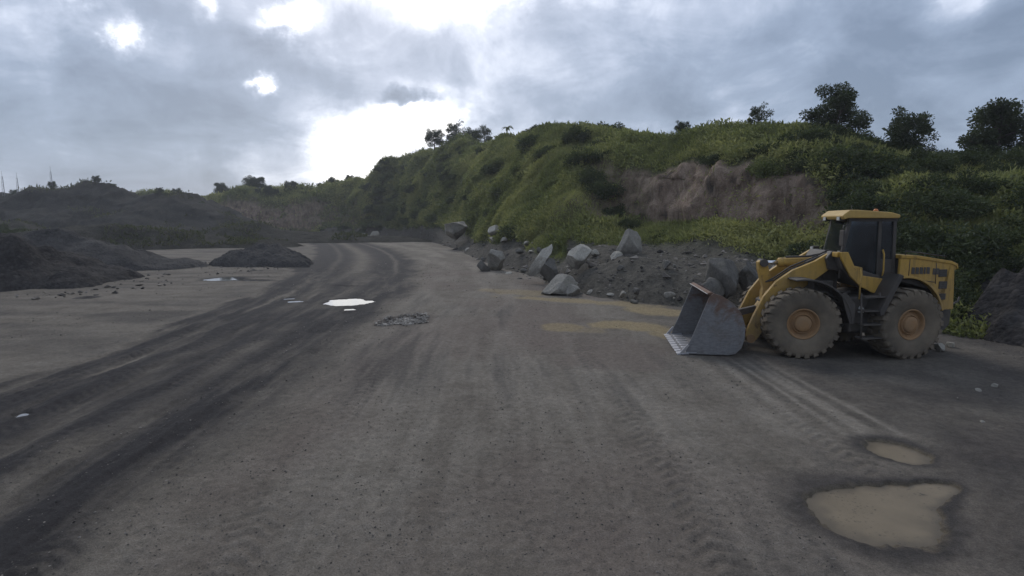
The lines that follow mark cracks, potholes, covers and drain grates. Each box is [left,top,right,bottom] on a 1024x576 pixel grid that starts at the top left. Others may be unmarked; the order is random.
pothole [374,314,433,328]
pothole [788,475,971,560]
pothole [319,296,378,308]
pothole [854,435,942,469]
